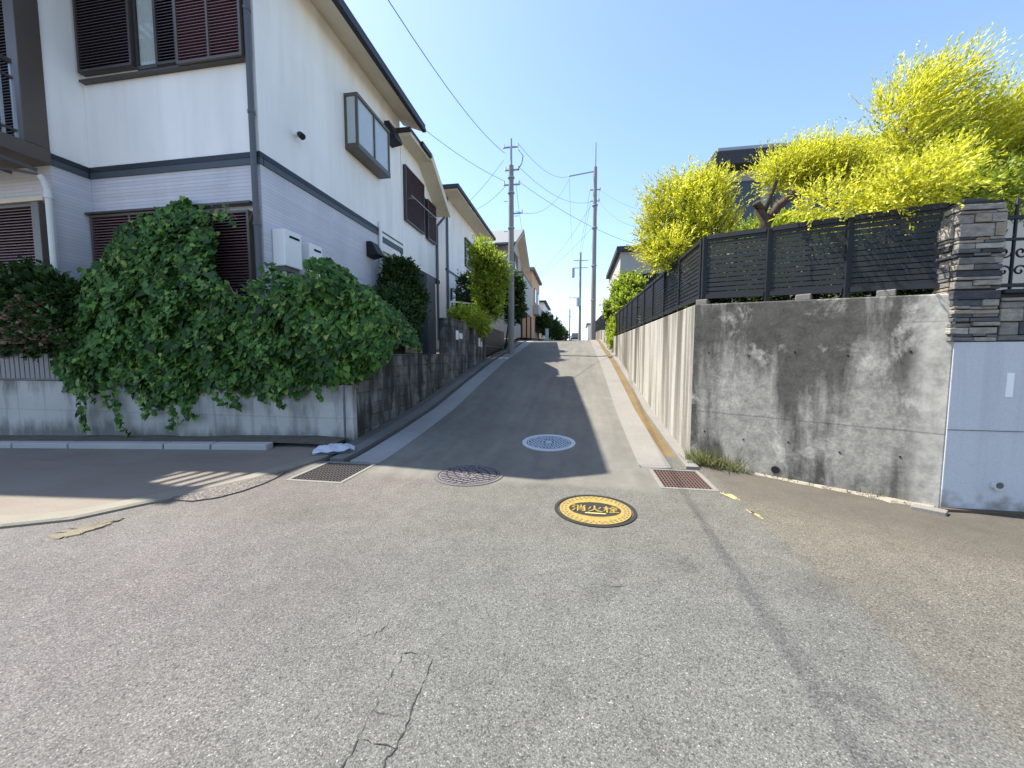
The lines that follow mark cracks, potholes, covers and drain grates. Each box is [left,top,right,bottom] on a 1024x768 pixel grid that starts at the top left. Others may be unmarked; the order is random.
drain grate [649,468,720,492]
drain grate [286,461,377,484]
crack [341,651,433,768]
manhole cover [555,495,637,528]
manhole cover [434,464,504,487]
manhole cover [522,434,575,451]
